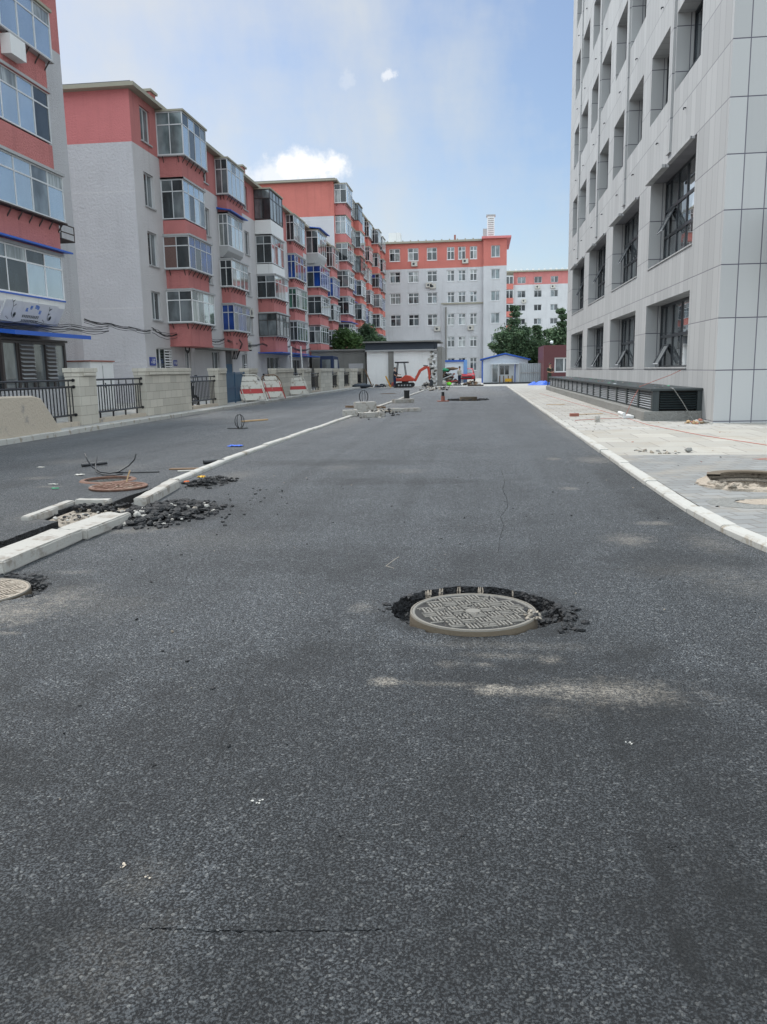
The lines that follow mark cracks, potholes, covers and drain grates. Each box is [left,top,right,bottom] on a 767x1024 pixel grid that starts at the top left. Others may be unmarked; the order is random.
crack [9,923,398,933]
manhole cover [410,593,544,637]
manhole cover [88,482,148,492]
manhole cover [79,476,137,484]
manhole cover [0,578,32,602]
manhole cover [696,470,767,492]
